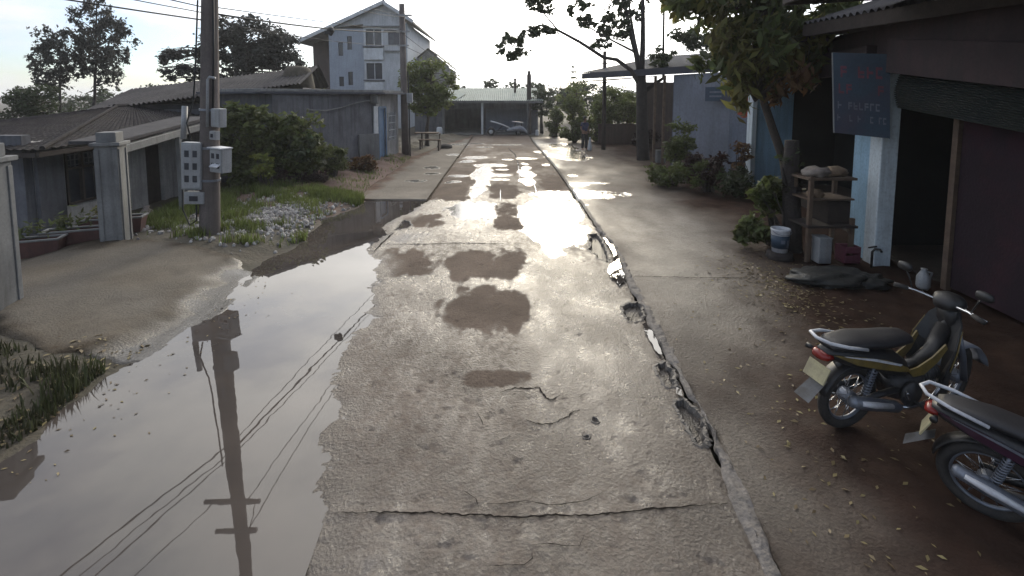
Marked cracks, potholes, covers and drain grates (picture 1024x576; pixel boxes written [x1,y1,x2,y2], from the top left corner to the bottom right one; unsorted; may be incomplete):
crack [500,387,585,440]
pothole [671,397,714,449]
pothole [652,360,681,390]
pothole [586,233,611,264]
pothole [620,301,646,323]
